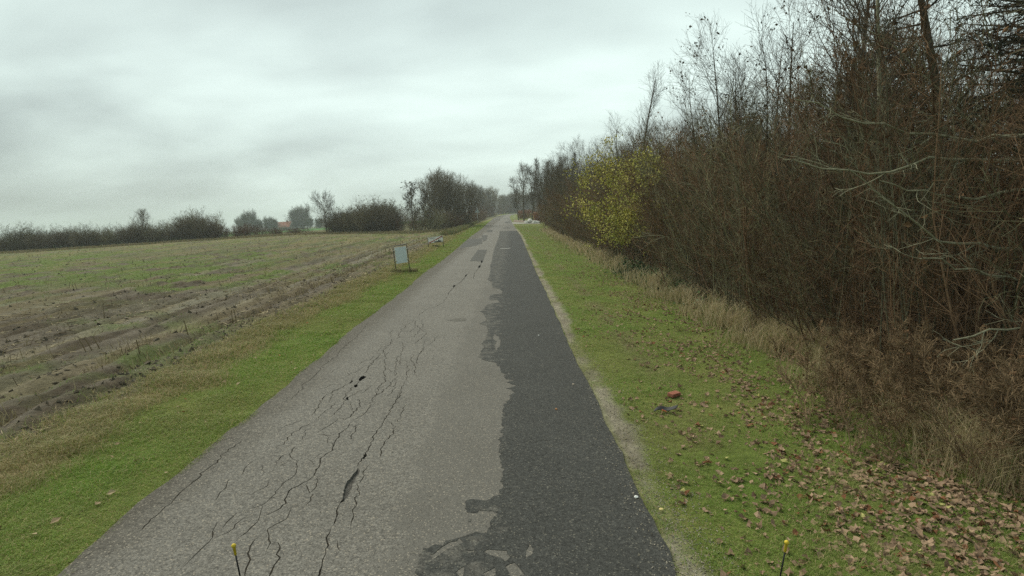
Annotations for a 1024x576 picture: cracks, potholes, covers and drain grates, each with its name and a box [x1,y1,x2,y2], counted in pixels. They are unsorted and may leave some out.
pothole [343,469,360,501]
crack [136,262,482,576]
